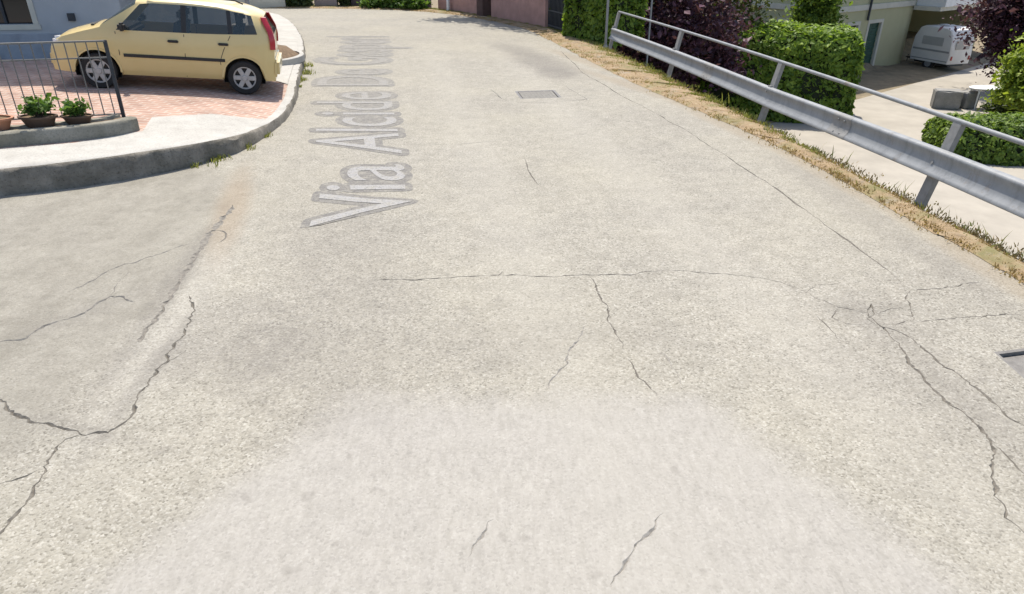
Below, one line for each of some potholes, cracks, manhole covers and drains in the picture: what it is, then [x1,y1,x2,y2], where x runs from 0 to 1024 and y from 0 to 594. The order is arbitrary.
crack [610,513,663,589]
crack [0,243,190,342]
crack [468,519,493,558]
crack [0,296,195,534]
crack [562,52,1024,533]
manhole cover [515,90,561,99]
crack [376,270,799,396]
